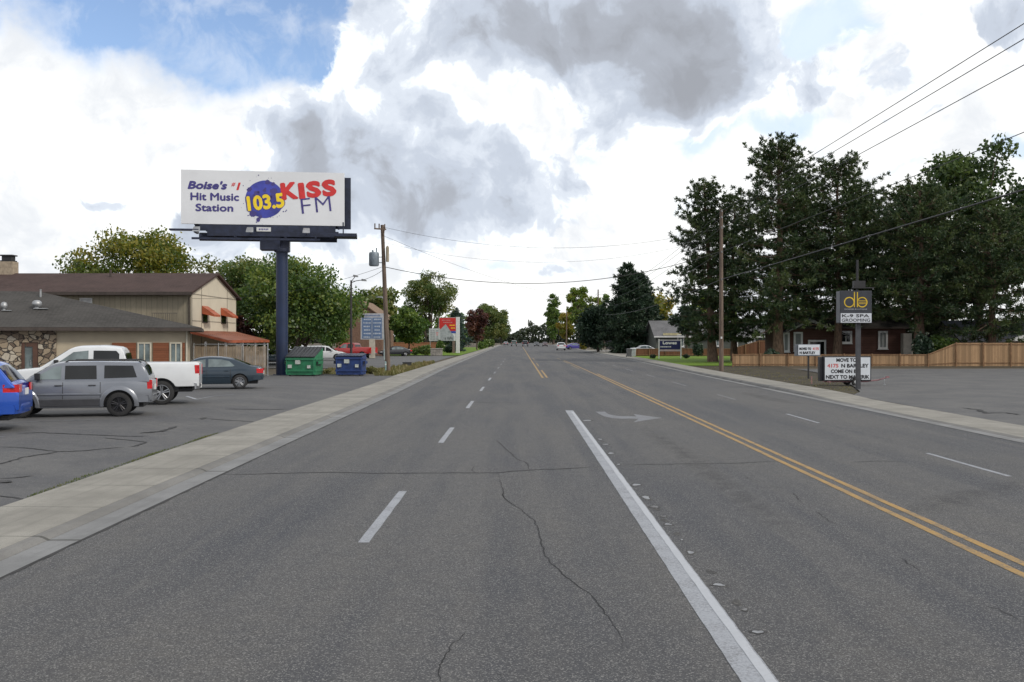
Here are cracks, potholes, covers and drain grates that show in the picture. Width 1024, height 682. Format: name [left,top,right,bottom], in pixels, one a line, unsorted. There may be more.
crack [438,633,465,681]
crack [0,432,146,478]
crack [263,441,623,640]
